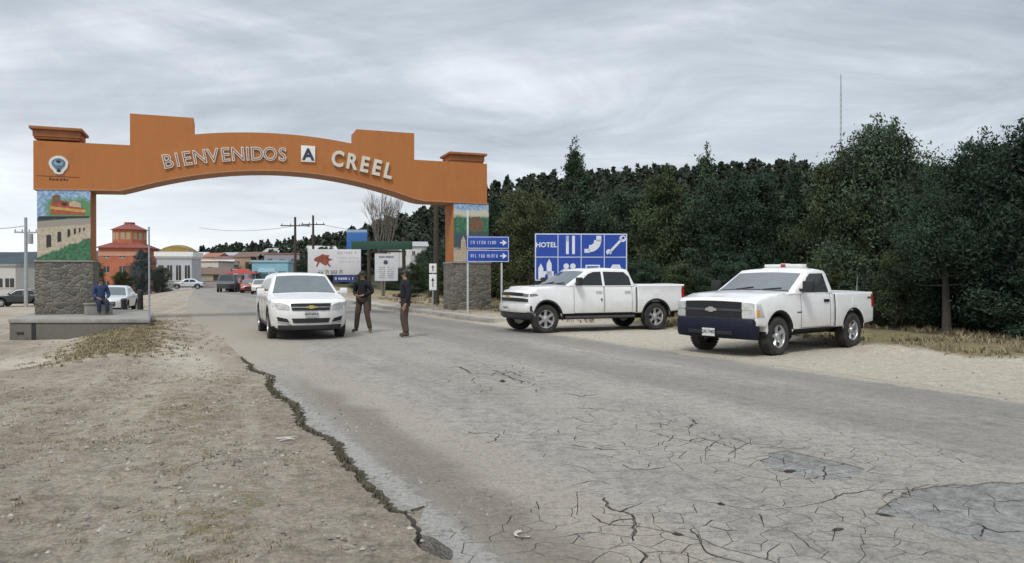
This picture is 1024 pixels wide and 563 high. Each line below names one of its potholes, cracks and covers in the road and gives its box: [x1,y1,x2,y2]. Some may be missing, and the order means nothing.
crack [433,363,558,394]
crack [435,394,1024,563]
